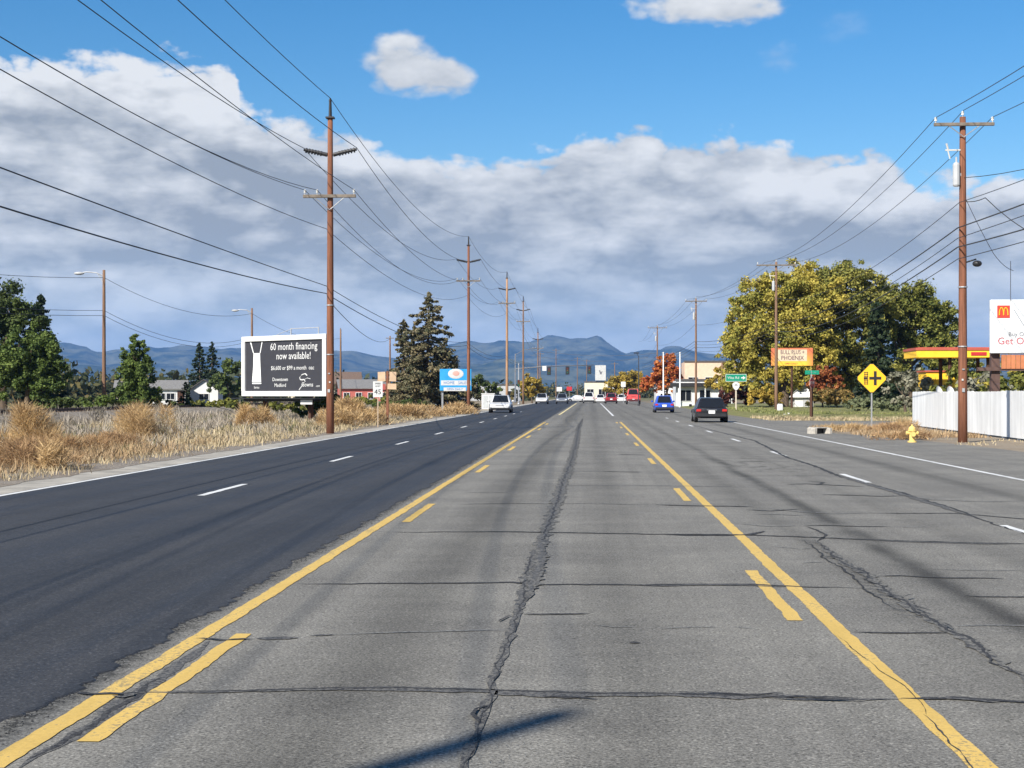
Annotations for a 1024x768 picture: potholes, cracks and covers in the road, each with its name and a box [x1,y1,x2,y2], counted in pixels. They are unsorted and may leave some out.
crack [207,413,1024,768]
